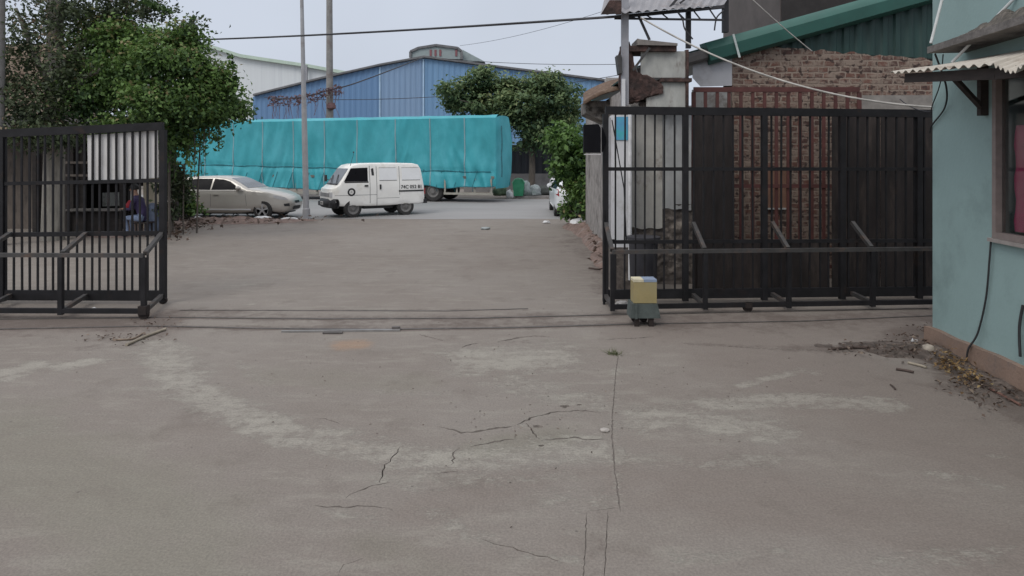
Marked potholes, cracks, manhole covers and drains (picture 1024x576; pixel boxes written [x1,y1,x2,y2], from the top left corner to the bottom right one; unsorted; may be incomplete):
crack [436,410,600,474]
crack [315,447,400,510]
crack [464,335,547,347]
crack [483,539,557,561]
